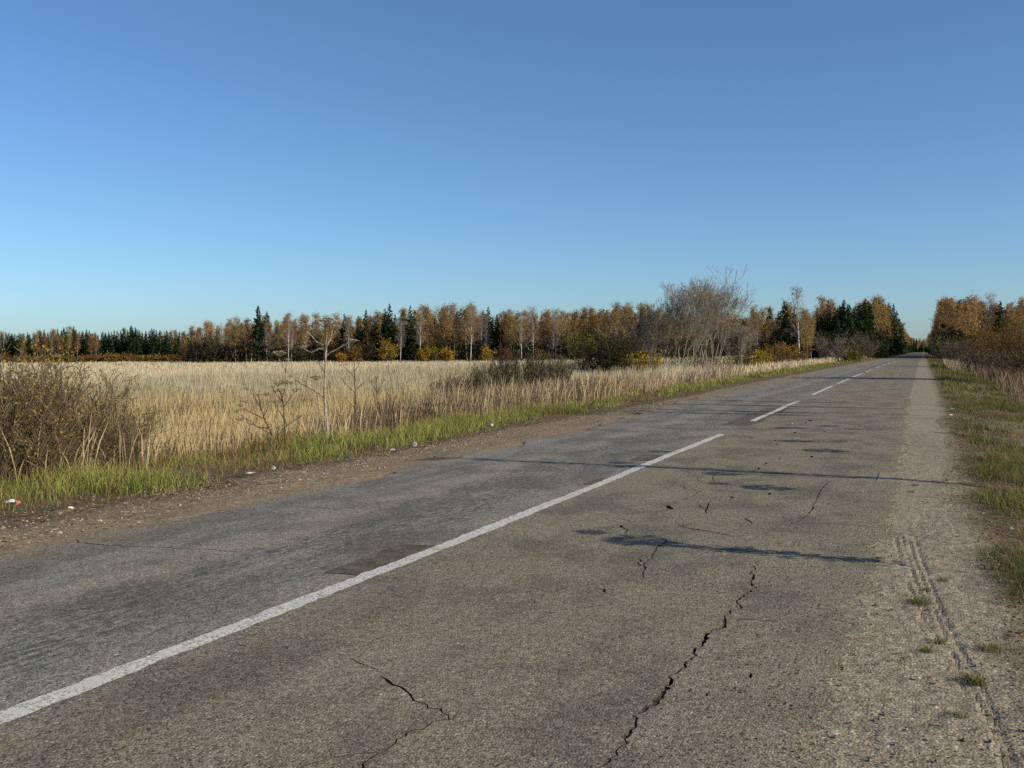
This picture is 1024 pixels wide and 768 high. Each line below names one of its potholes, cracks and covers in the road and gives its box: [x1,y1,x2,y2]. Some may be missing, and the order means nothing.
crack [300,658,462,768]
crack [789,482,829,526]
crack [618,463,740,578]
crack [603,561,775,766]
